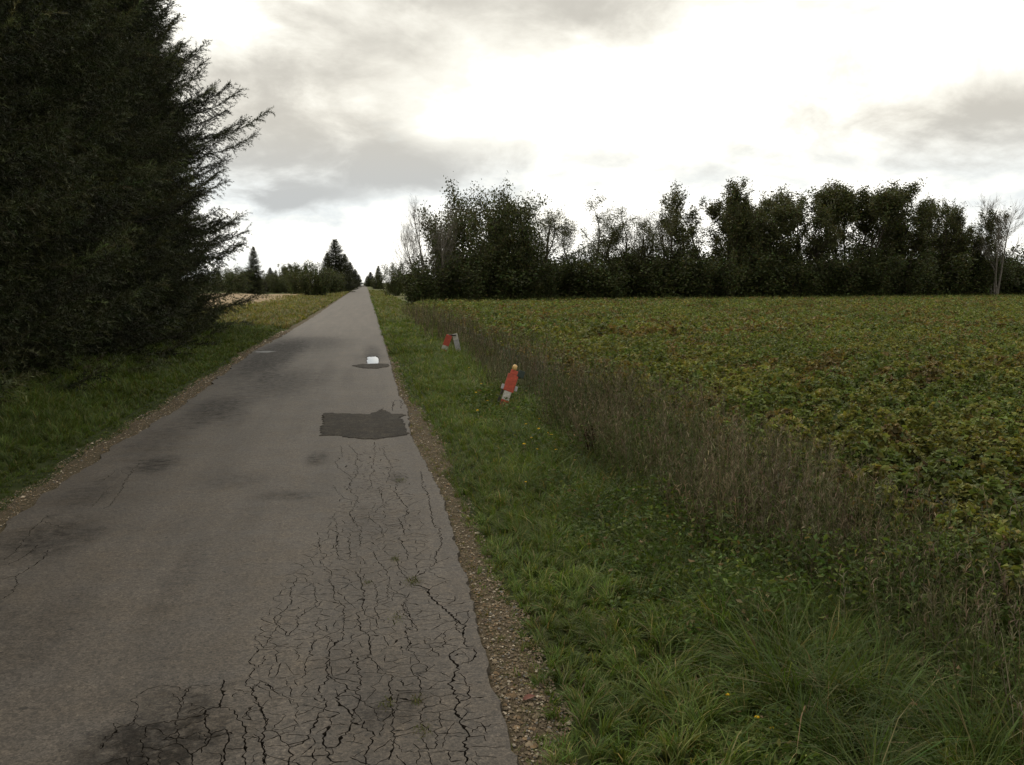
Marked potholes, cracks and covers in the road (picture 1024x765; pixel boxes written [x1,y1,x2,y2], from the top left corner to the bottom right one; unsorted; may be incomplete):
crack [100,442,503,765]
crack [0,515,63,600]
